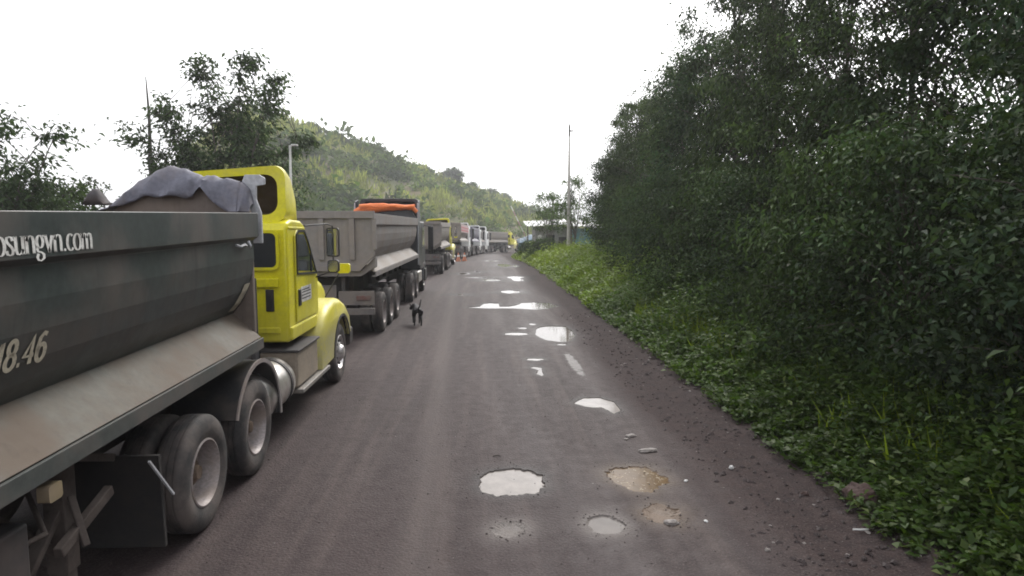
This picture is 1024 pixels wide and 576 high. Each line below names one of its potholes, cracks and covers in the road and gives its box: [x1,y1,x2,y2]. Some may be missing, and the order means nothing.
pothole [586,514,627,534]
pothole [642,503,681,524]
pothole [574,397,621,413]
pothole [535,326,575,342]
pothole [604,466,670,493]
pothole [490,521,528,538]
pothole [478,468,546,496]
